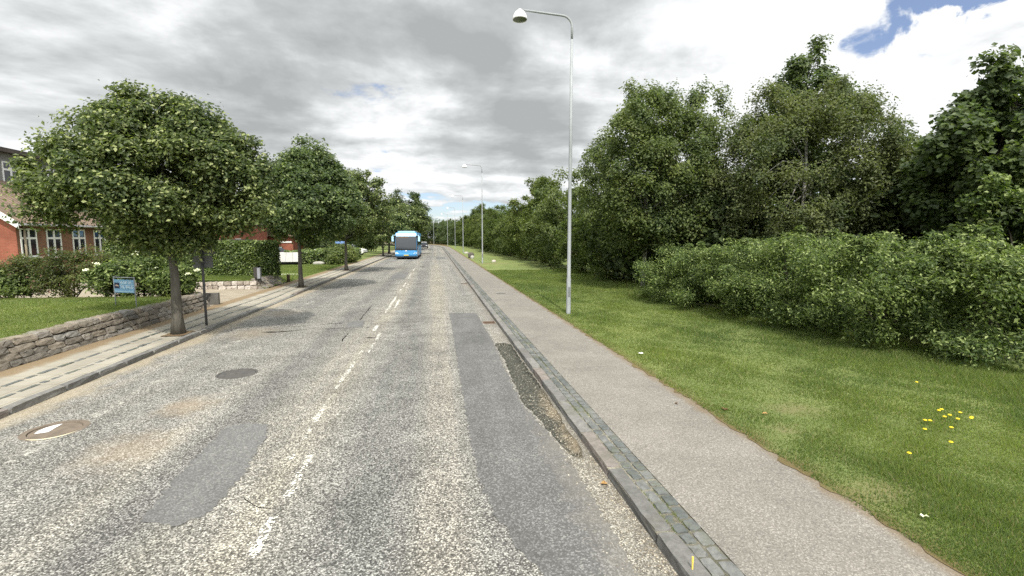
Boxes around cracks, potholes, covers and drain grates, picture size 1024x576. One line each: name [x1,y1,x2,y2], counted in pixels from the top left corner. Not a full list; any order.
pothole [495,343,583,458]
manhole cover [215,368,258,379]
manhole cover [18,420,91,441]
